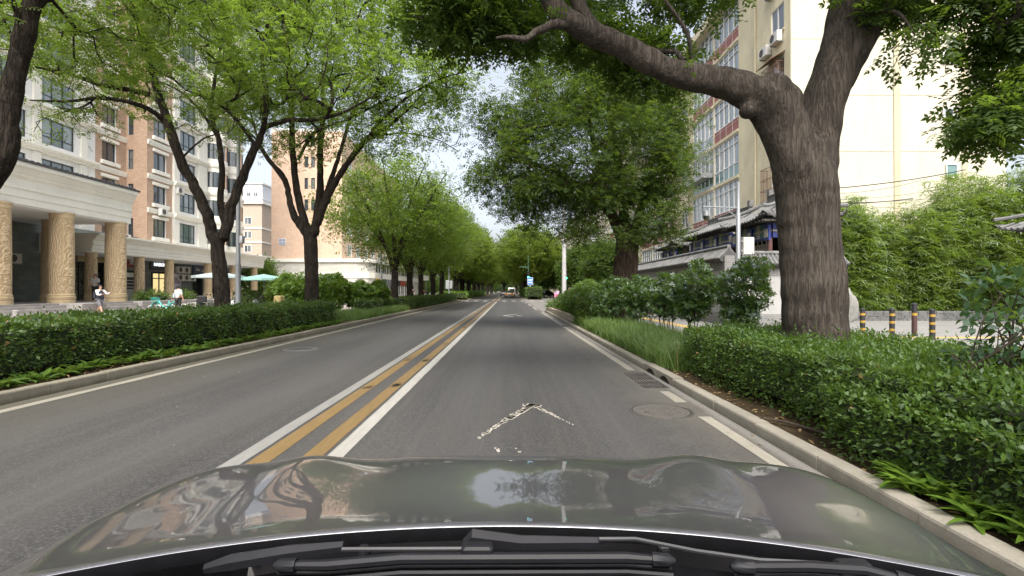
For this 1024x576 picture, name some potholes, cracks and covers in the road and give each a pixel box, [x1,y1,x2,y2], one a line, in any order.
manhole cover [629,404,695,419]
drain grate [623,373,669,388]
